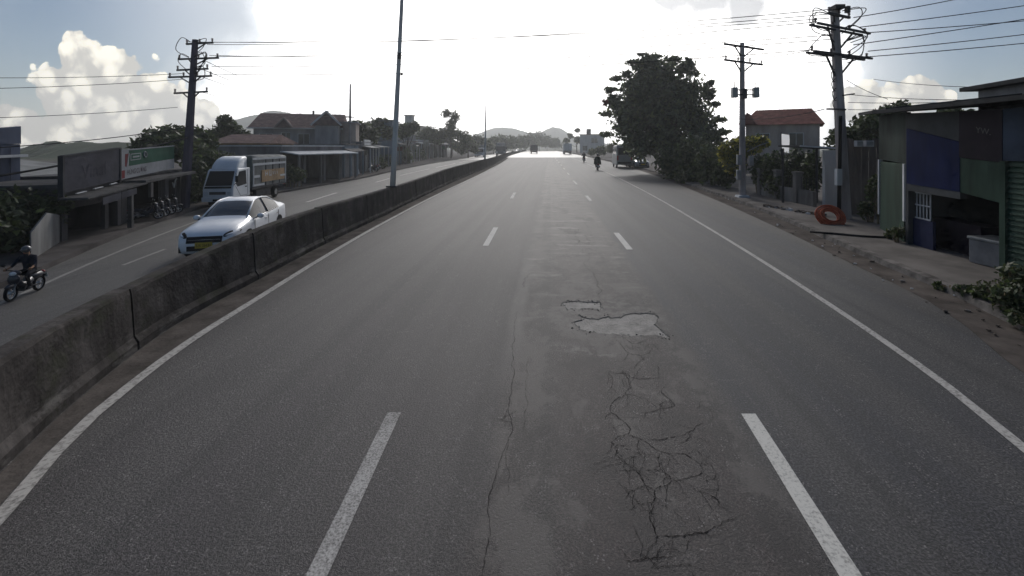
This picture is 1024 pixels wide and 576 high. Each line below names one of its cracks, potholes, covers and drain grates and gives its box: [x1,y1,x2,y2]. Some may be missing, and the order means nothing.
crack [482,334,529,572]
pothole [572,311,674,340]
pothole [561,299,604,312]
